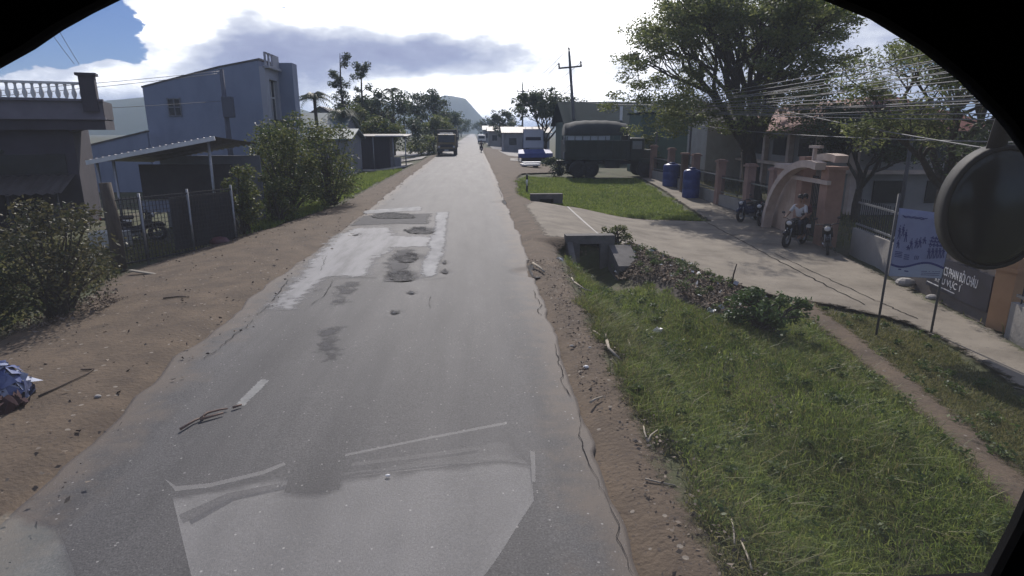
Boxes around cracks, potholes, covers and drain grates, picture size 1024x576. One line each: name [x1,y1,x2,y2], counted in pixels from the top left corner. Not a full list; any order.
crack [774,253,918,319]
pothole [388,270,414,282]
pothole [395,253,418,263]
